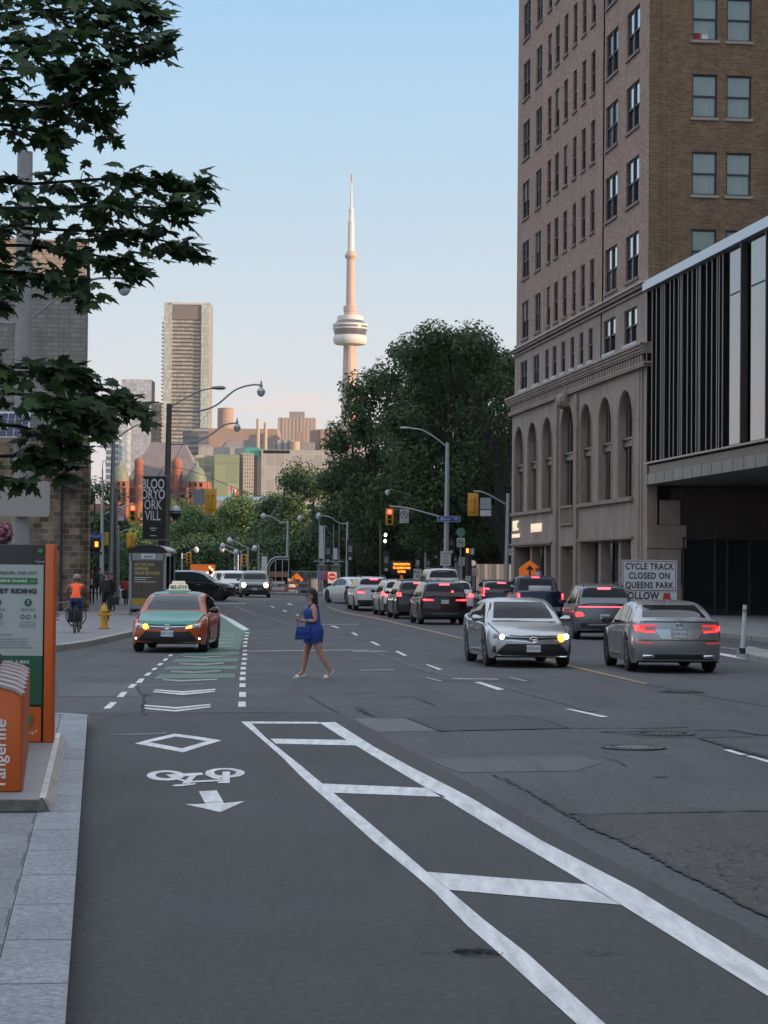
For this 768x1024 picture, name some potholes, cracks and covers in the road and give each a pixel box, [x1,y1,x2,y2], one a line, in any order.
crack [493,774,768,916]
pothole [448,949,504,958]
